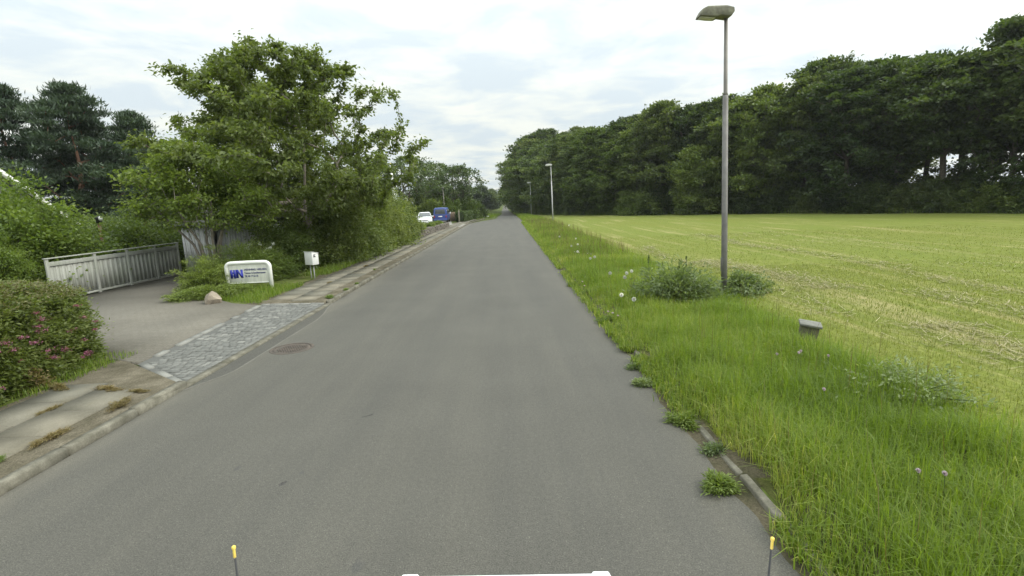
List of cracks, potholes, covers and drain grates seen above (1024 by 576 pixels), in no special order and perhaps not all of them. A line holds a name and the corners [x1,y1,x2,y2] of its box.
manhole cover [269,342,314,355]
